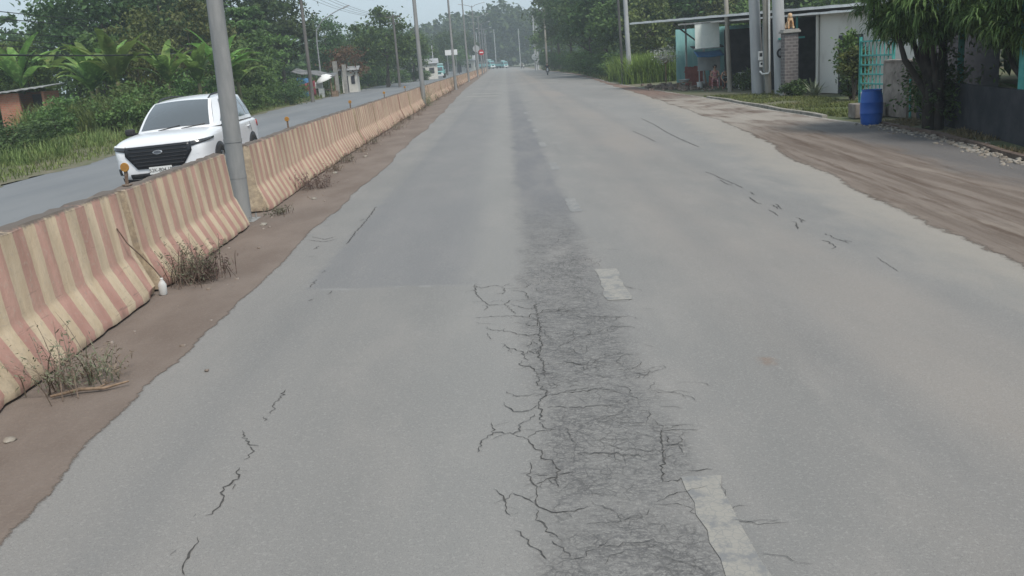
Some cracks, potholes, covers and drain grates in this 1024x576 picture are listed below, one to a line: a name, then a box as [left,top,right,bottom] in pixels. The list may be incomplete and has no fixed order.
crack [170,391,285,575]
crack [474,230,811,572]
